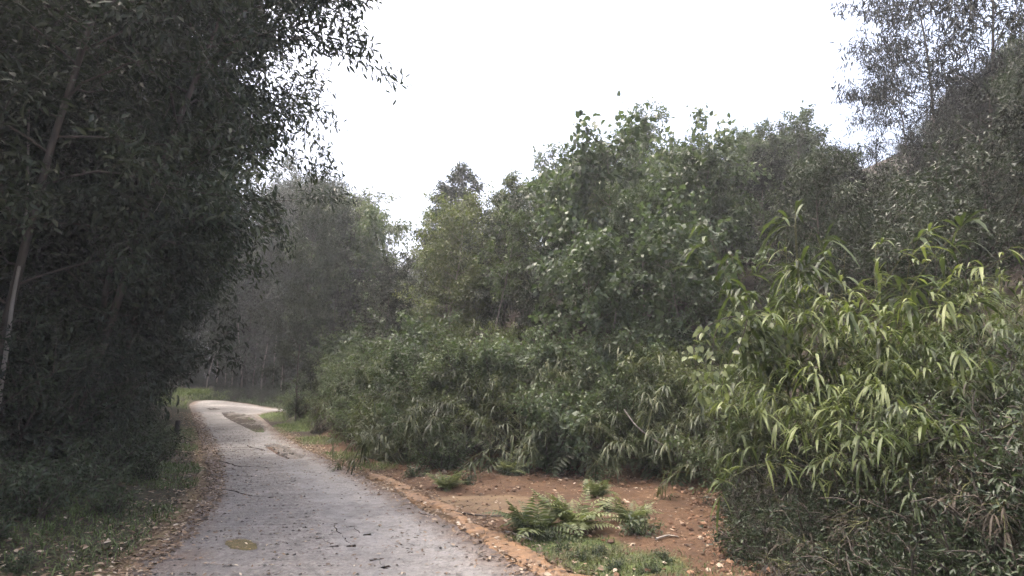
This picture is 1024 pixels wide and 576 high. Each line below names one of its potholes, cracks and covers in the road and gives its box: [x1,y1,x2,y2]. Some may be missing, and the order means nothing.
crack [314,523,393,569]
crack [219,445,269,468]
pothole [217,536,265,552]
crack [200,486,272,498]
